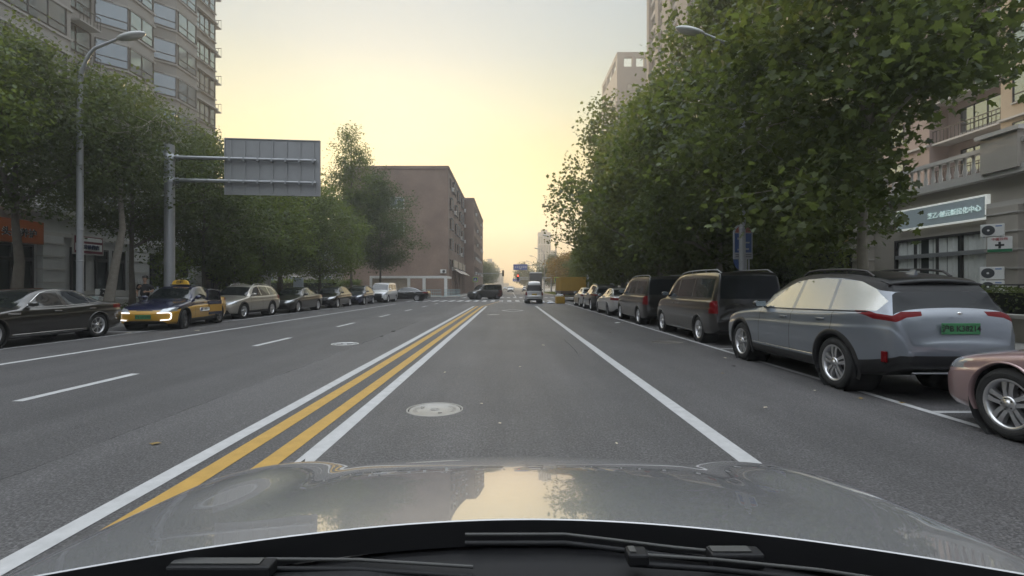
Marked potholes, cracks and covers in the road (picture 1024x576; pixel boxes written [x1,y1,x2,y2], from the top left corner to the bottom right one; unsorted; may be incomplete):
manhole cover [406,402,463,417]
